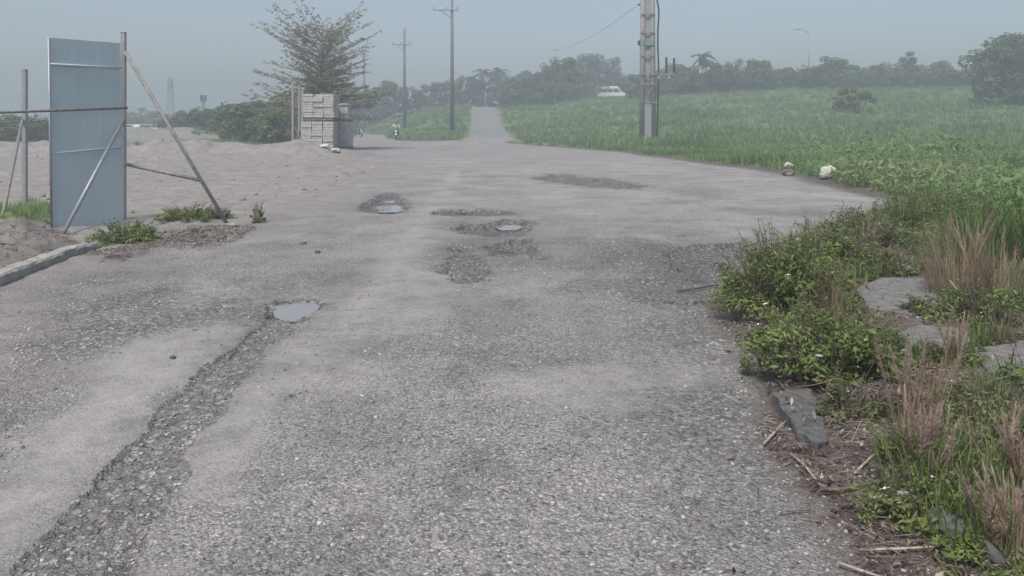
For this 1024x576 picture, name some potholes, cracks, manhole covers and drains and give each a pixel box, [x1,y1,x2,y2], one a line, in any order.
pothole [449,218,541,237]
pothole [433,254,493,284]
pothole [258,299,328,324]
pothole [477,239,555,261]
pothole [429,208,517,216]
pothole [356,192,413,214]
